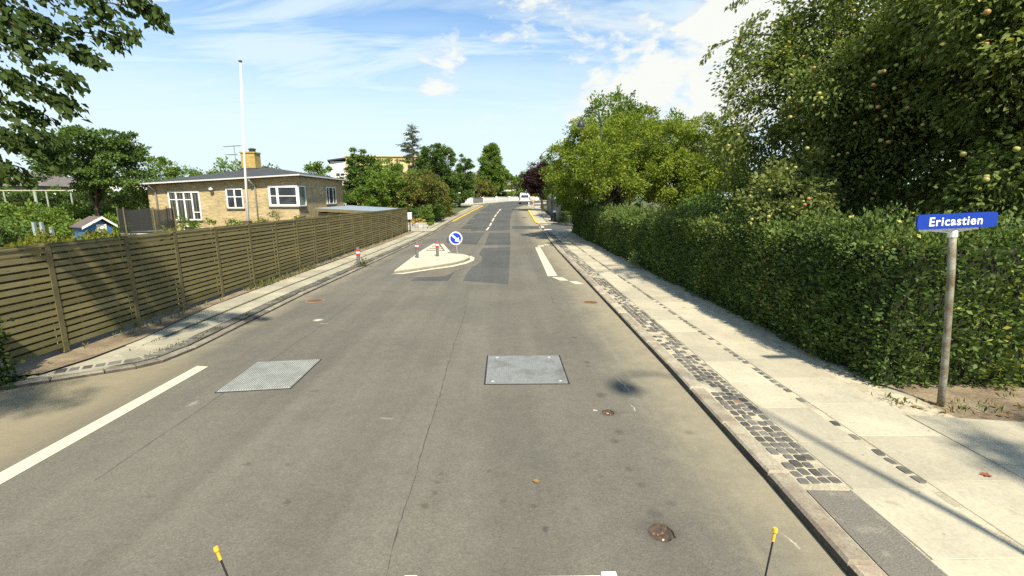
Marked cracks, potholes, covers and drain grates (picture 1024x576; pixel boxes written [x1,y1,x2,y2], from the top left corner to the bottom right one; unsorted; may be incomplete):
manhole cover [215,359,322,393]
manhole cover [484,355,570,385]
